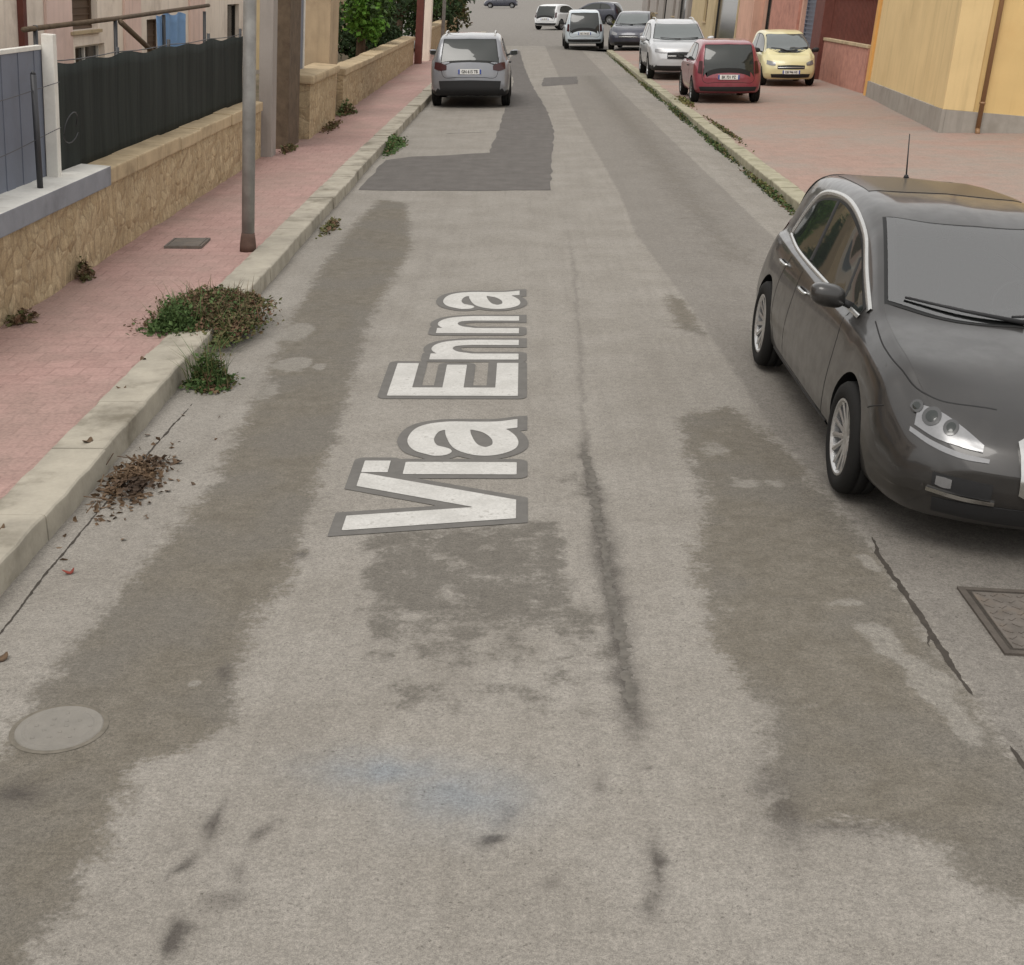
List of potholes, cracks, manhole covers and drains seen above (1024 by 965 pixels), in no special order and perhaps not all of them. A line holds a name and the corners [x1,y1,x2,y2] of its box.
crack [0,404,192,634]
crack [871,537,973,695]
manhole cover [164,238,211,249]
manhole cover [957,586,1024,656]
manhole cover [9,704,109,754]
